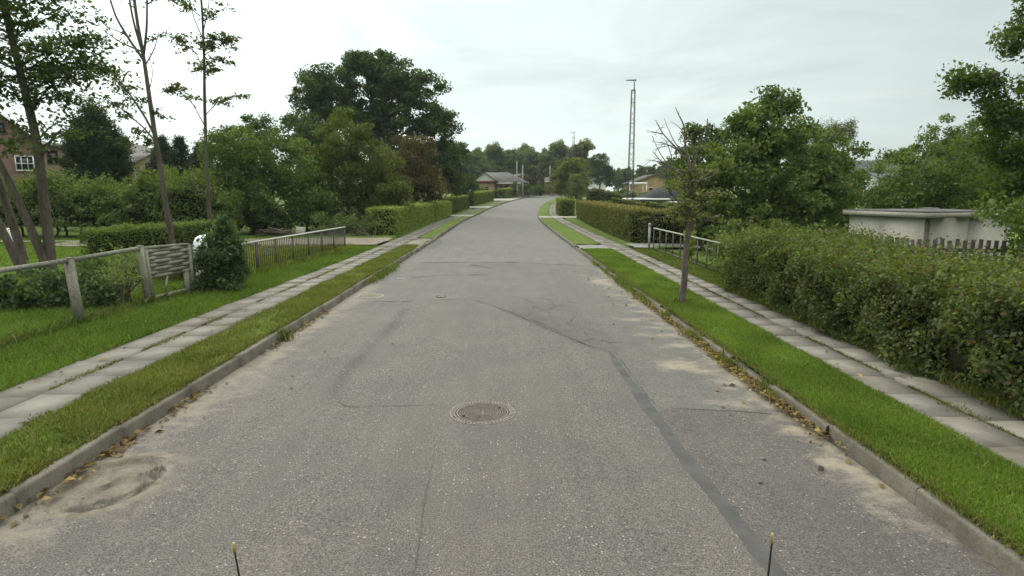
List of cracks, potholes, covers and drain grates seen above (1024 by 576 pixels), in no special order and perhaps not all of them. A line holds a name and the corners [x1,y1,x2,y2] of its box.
crack [475,297,654,402]
manhole cover [449,401,516,425]
